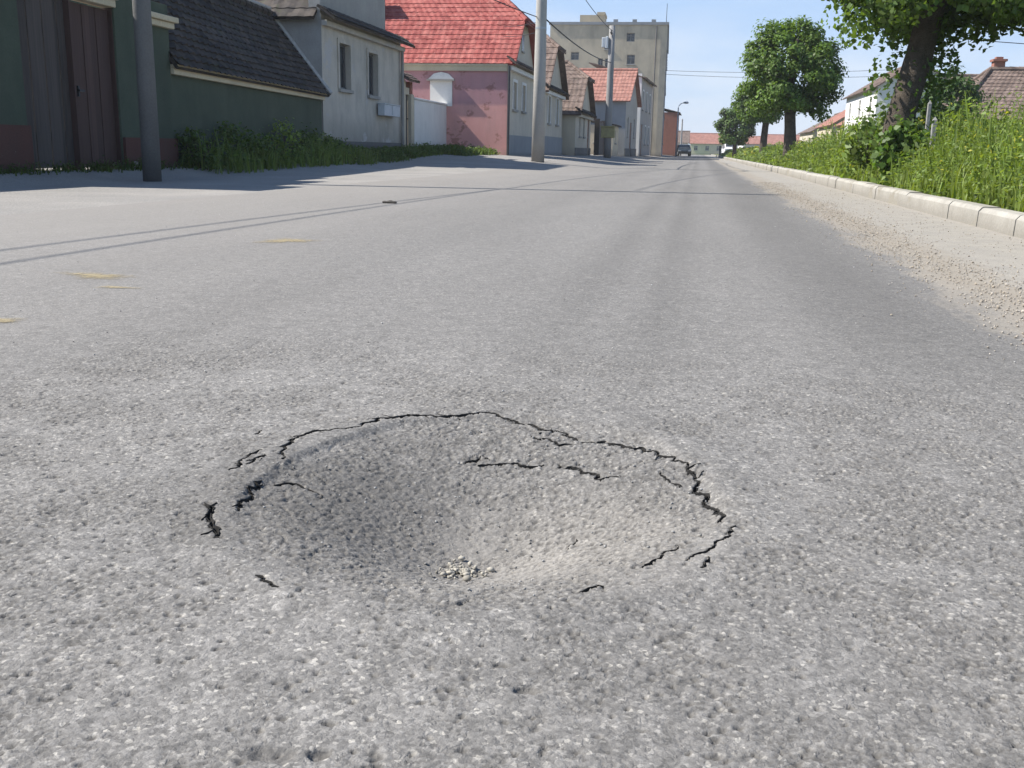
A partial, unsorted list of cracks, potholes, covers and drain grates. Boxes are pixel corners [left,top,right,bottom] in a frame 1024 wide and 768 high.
pothole [232,412,731,616]
crack [580,585,604,593]
crack [201,412,736,568]
crack [255,574,280,588]
